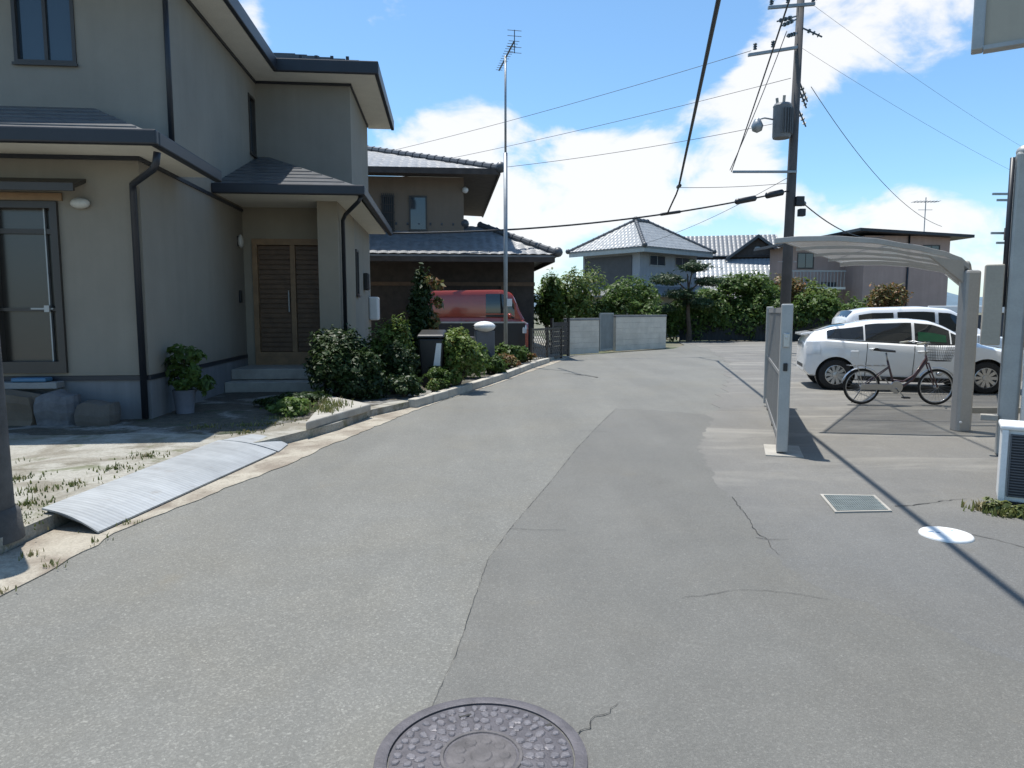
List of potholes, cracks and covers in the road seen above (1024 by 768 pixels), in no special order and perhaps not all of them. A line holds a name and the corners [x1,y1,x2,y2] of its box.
drain grate [820,494,892,513]
manhole cover [373,697,588,768]
